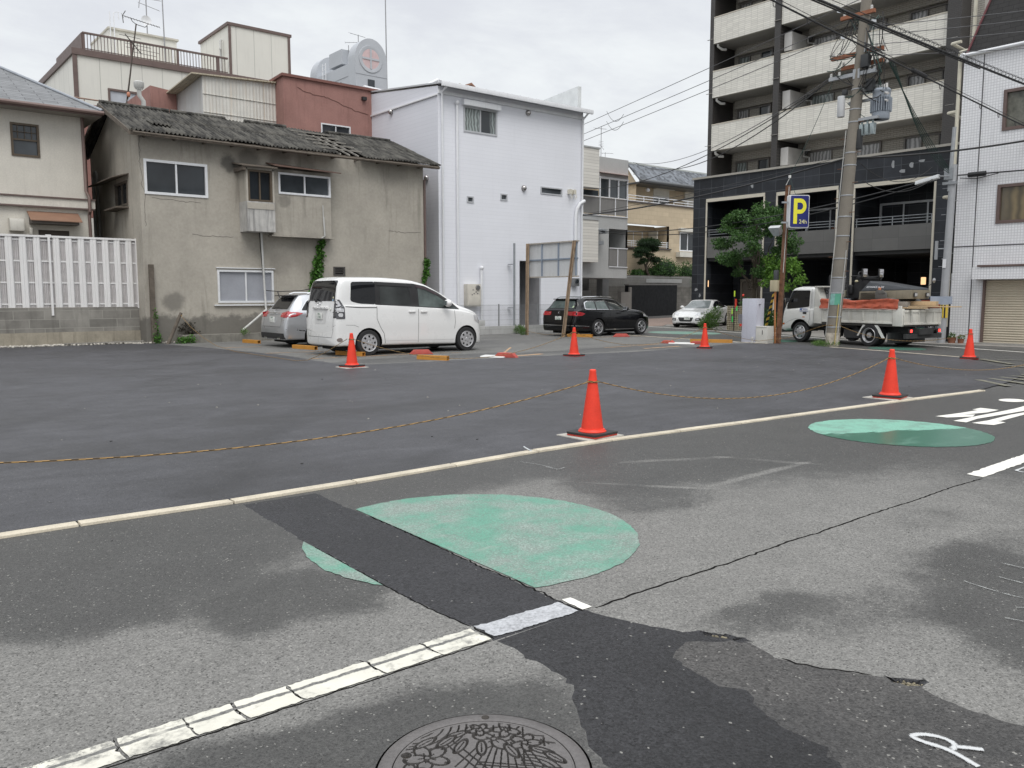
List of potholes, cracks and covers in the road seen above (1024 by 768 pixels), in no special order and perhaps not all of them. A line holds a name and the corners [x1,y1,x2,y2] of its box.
manhole cover [378,714,590,768]
crack [782,658,870,675]
